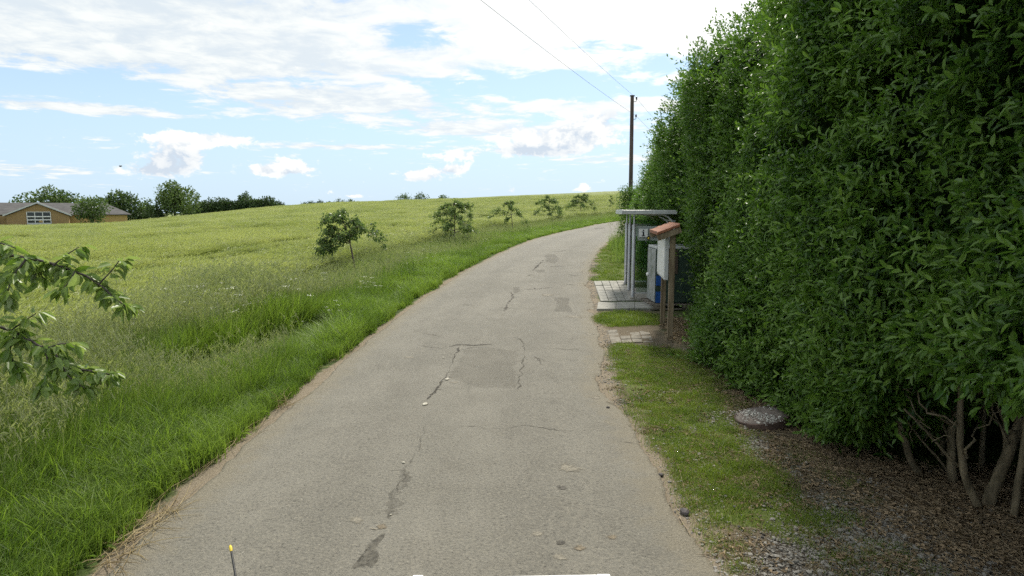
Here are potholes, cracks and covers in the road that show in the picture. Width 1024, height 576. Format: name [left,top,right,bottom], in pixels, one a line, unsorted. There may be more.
crack [424,333,487,399]
crack [515,337,575,390]
manhole cover [734,406,790,431]
